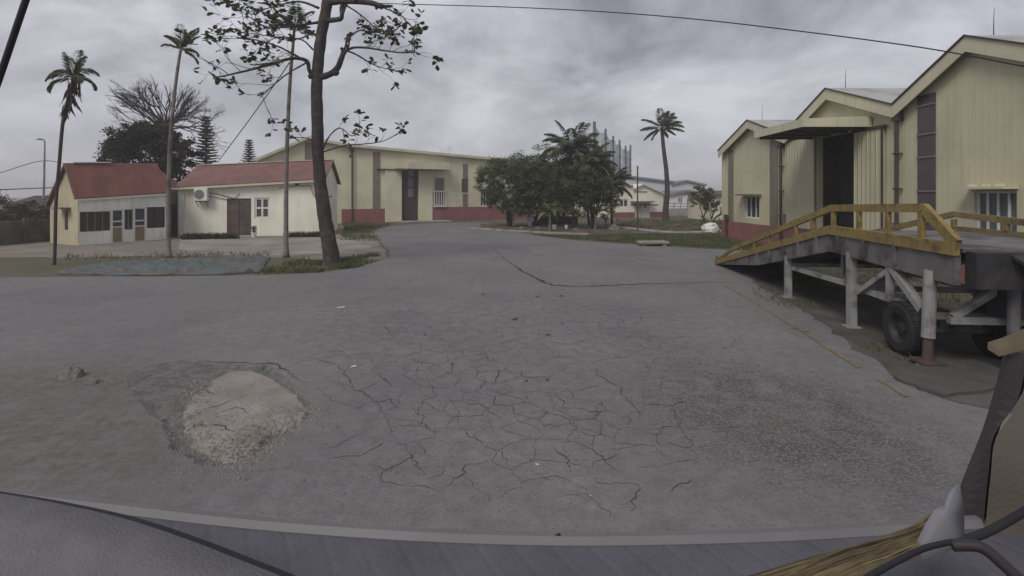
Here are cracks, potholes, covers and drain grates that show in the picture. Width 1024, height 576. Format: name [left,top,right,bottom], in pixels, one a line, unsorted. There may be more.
crack [286,295,753,515]
pothole [125,359,347,495]
